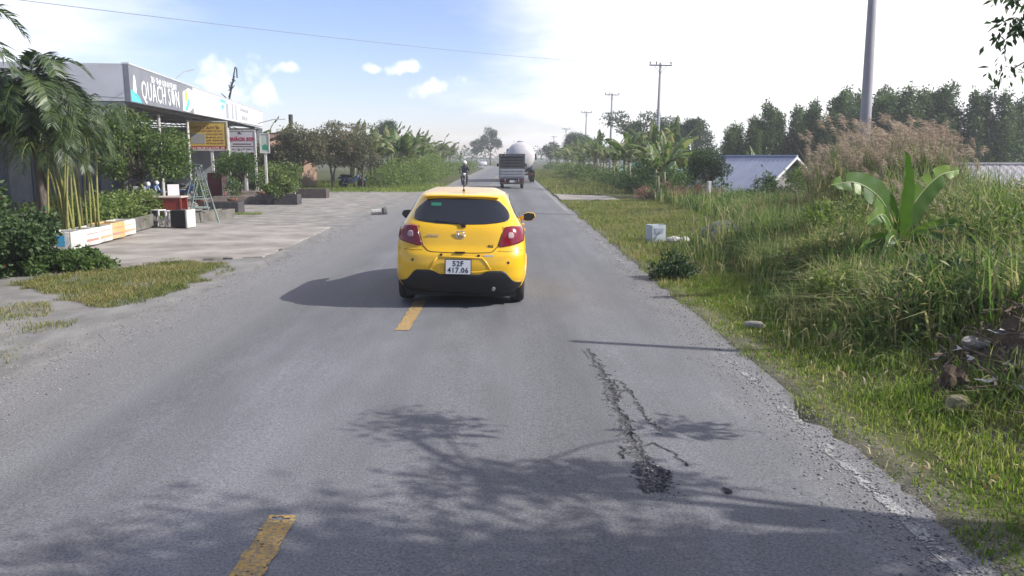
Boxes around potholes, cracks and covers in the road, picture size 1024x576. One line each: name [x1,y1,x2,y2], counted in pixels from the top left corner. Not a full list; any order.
pothole [628,456,674,494]
crack [581,348,689,467]
